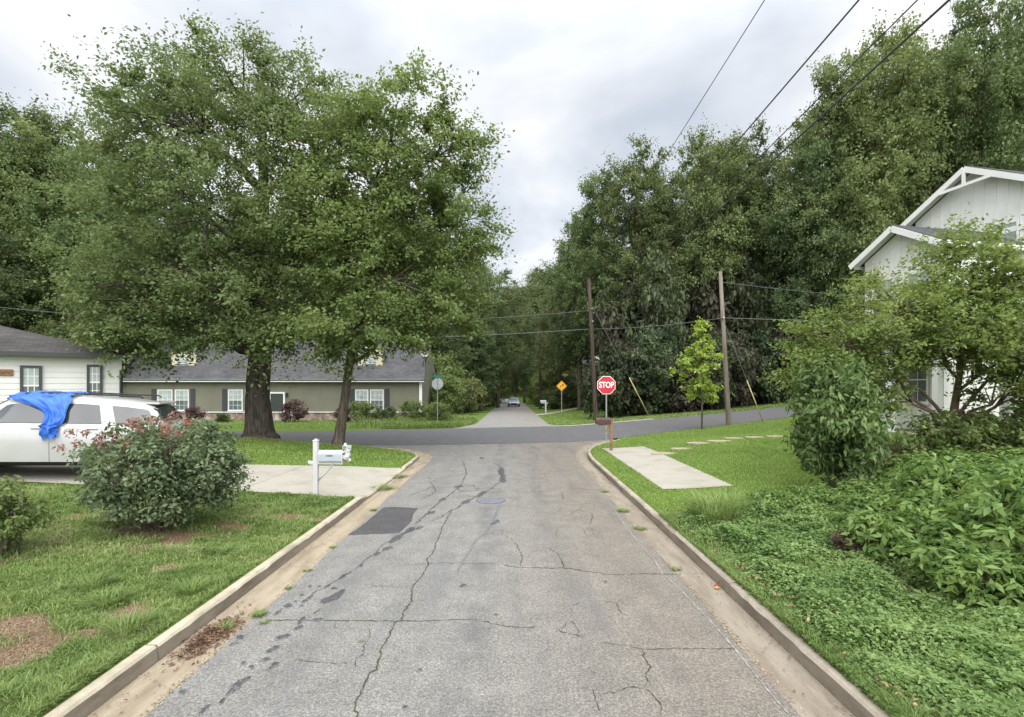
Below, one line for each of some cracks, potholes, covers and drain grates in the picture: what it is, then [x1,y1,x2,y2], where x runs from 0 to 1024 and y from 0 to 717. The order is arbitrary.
crack [593,642,732,713]
crack [266,463,656,717]
